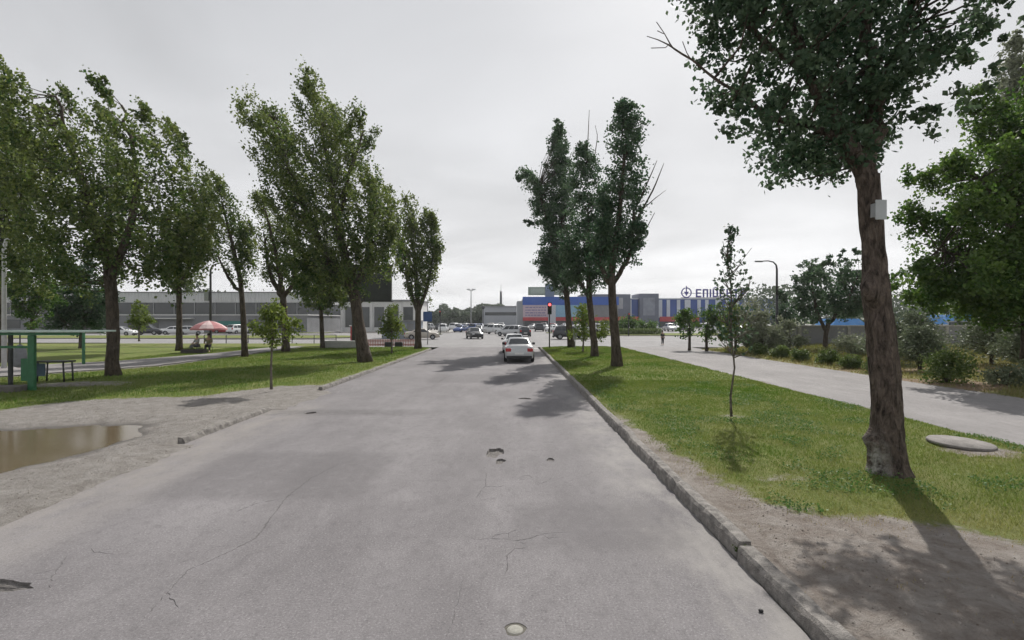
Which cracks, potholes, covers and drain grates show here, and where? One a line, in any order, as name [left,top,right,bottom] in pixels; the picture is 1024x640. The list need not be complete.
crack [479,530,563,578]
pothole [486,448,504,458]
manhole cover [504,623,527,636]
manhole cover [926,435,998,452]
crack [134,466,334,628]
pothole [0,579,33,592]
